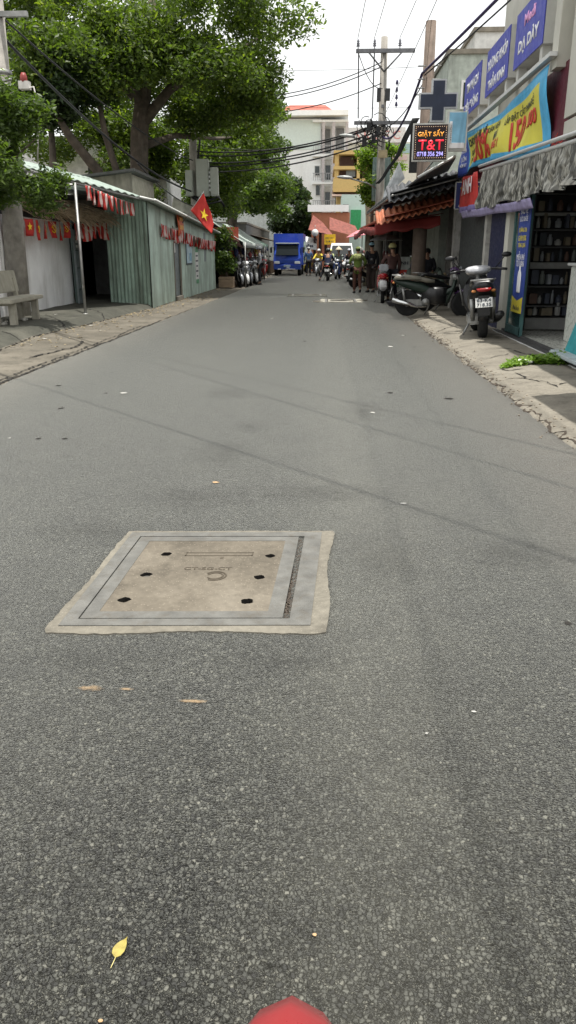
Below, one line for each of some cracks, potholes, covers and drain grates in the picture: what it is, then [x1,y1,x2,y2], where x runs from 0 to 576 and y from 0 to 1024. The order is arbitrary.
manhole cover [45,531,335,635]
